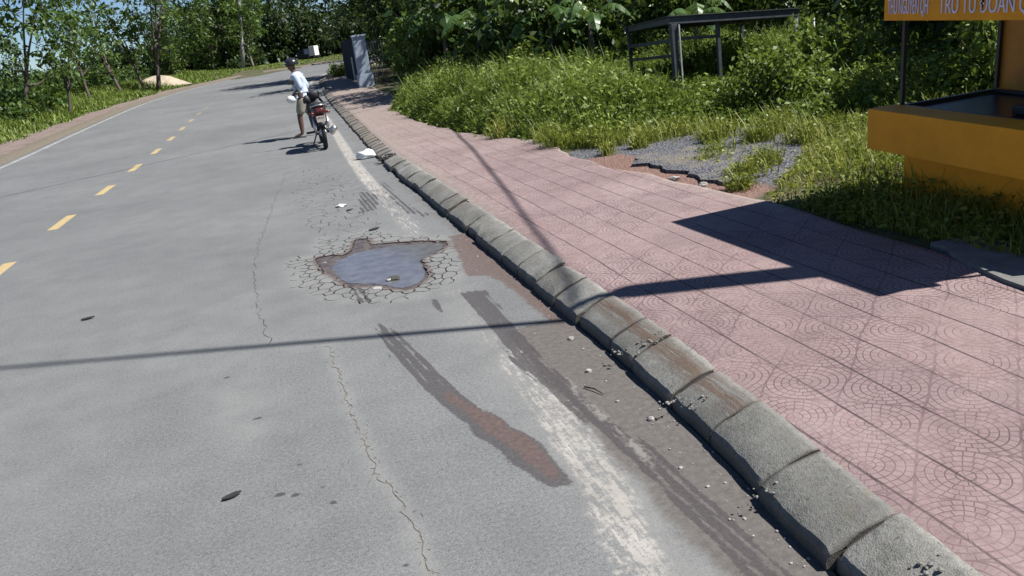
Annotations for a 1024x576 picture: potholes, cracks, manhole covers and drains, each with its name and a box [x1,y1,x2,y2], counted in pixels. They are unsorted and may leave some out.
crack [252,166,461,345]
crack [324,341,440,576]
pothole [315,238,448,290]
